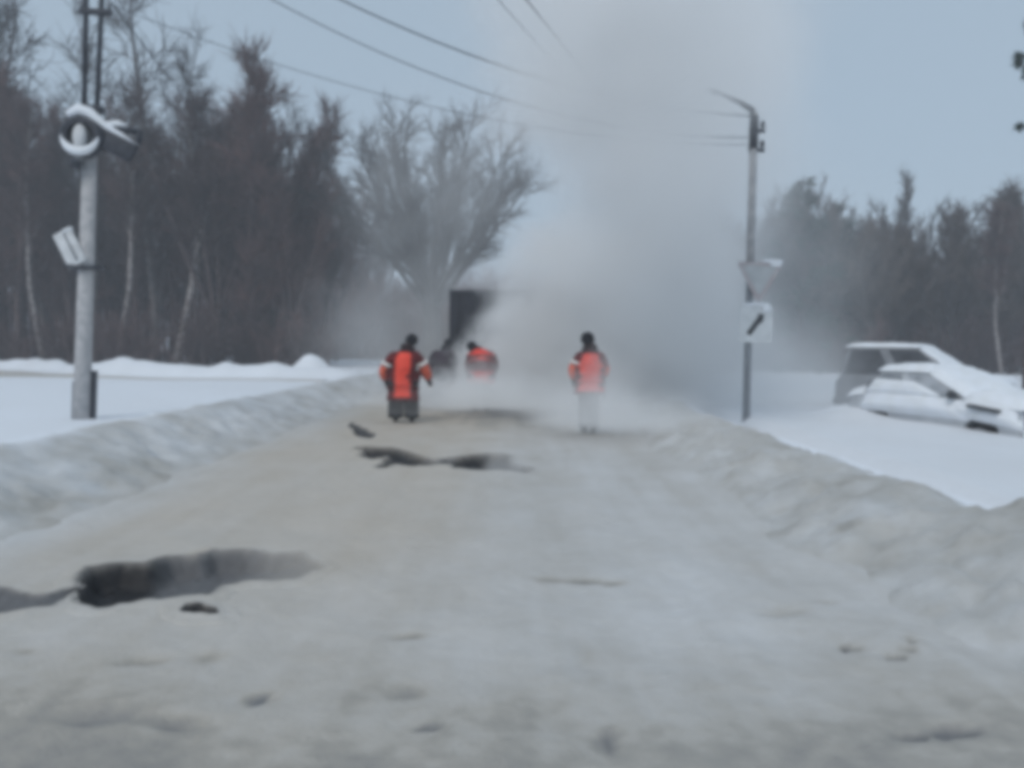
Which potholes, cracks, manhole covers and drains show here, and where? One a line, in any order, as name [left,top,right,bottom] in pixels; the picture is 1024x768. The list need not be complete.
pothole [346,446,542,475]
pothole [53,546,341,617]
